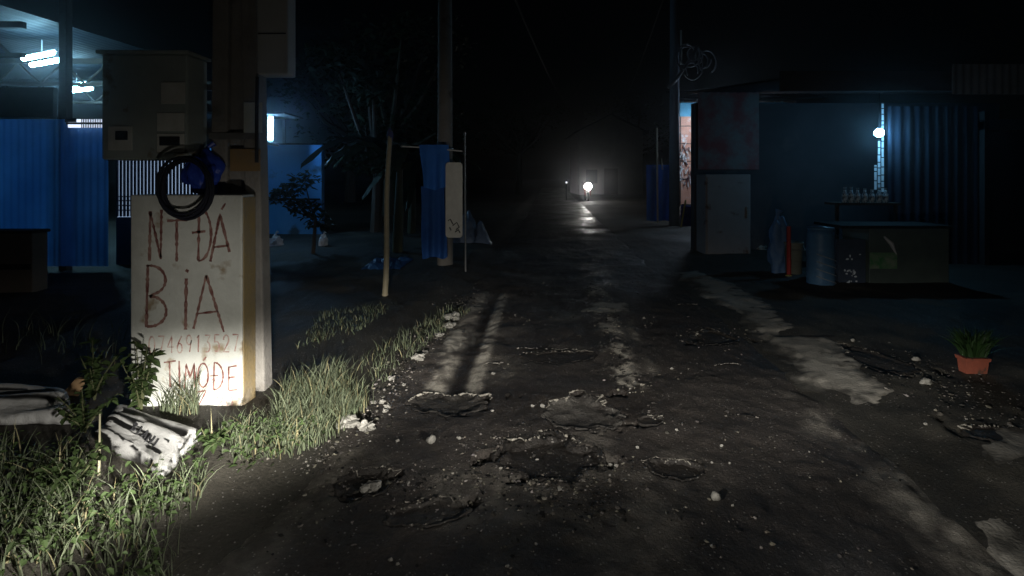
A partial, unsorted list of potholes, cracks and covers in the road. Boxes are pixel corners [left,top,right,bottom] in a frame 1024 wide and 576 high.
pothole [642,457,706,482]
pothole [405,392,493,418]
pothole [486,430,610,484]
pothole [839,343,921,377]
pothole [520,350,597,364]
pothole [541,390,627,433]
pothole [637,414,665,428]
pothole [685,329,746,346]
pothole [384,496,473,528]
pothole [334,465,401,503]
